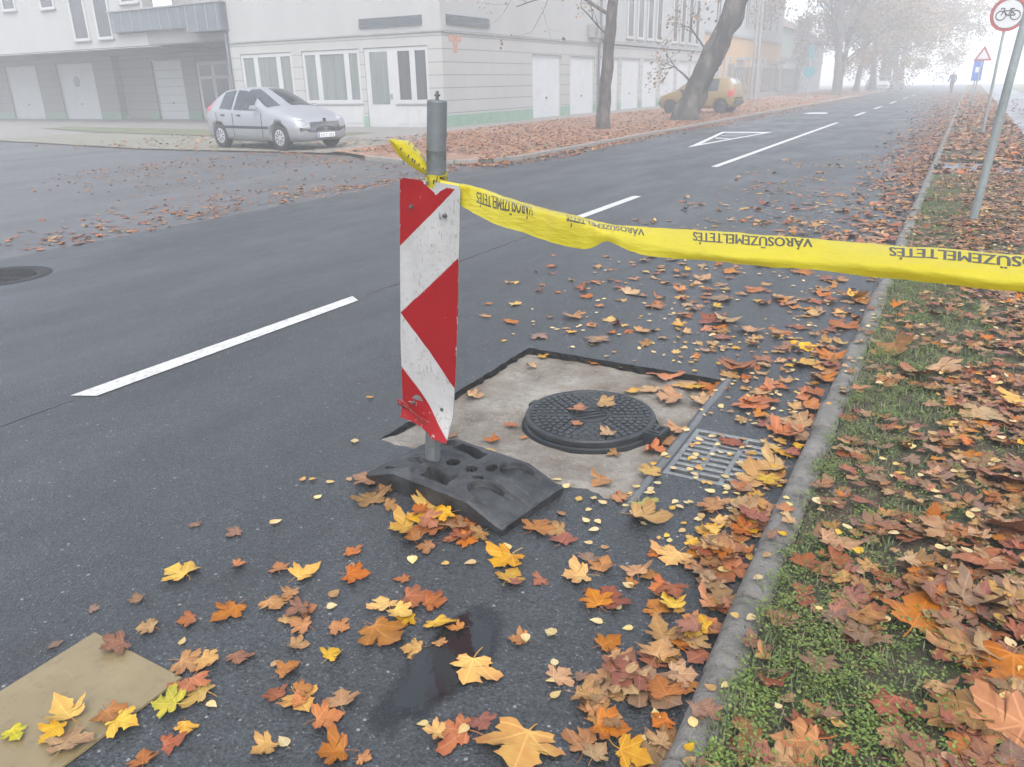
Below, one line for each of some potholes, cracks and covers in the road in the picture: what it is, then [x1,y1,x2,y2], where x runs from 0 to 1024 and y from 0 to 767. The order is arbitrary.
manhole cover [522,390,671,455]
drain grate [663,428,777,492]
